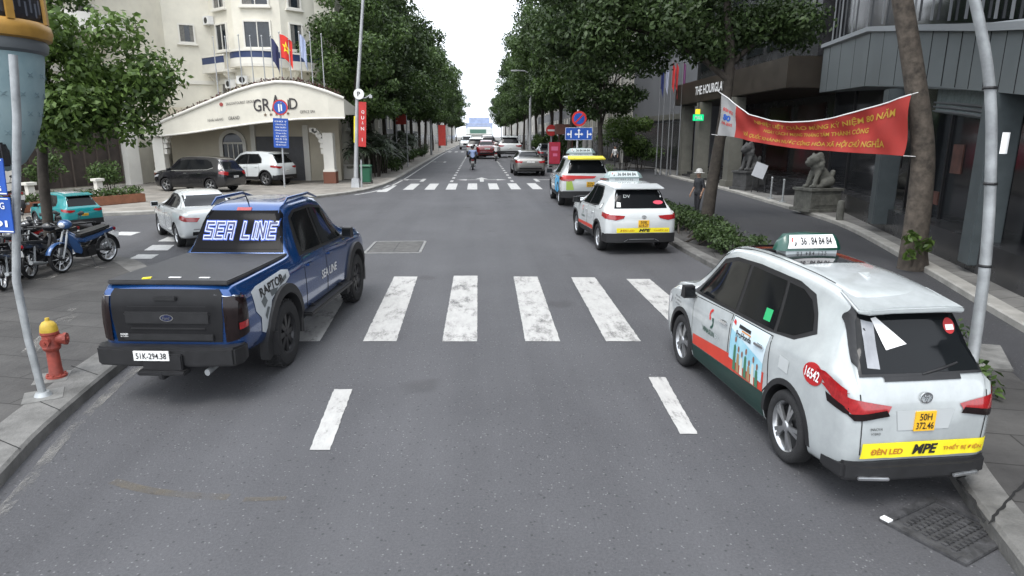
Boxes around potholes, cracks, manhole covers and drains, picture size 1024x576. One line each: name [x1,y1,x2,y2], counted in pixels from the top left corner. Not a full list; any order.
drain grate [879,495,998,567]
manhole cover [364,241,427,254]
